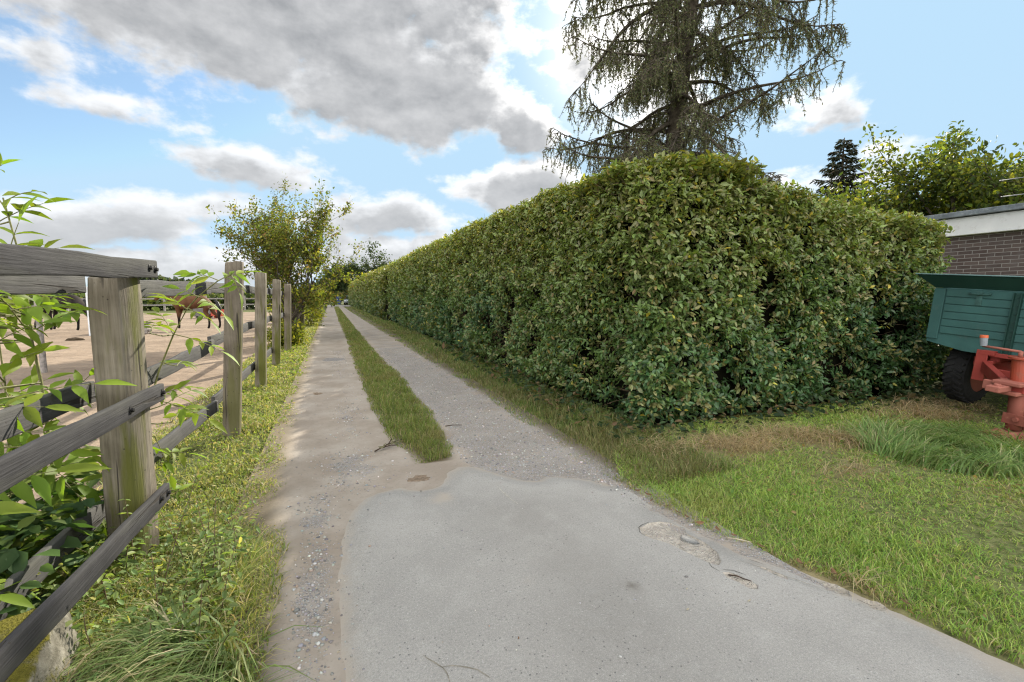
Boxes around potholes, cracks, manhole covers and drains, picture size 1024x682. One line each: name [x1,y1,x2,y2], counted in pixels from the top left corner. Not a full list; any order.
pothole [640,522,721,565]
pothole [723,572,758,589]
